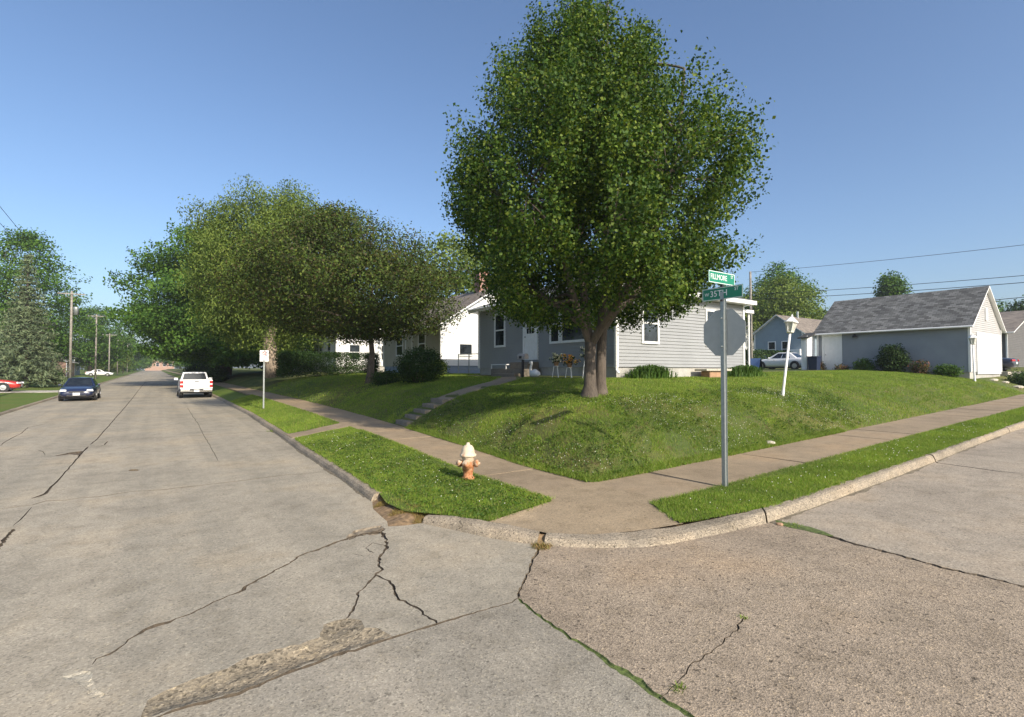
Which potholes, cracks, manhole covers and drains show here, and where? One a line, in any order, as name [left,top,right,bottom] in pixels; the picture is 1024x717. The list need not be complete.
crack [92,528,438,665]
crack [660,618,743,699]
